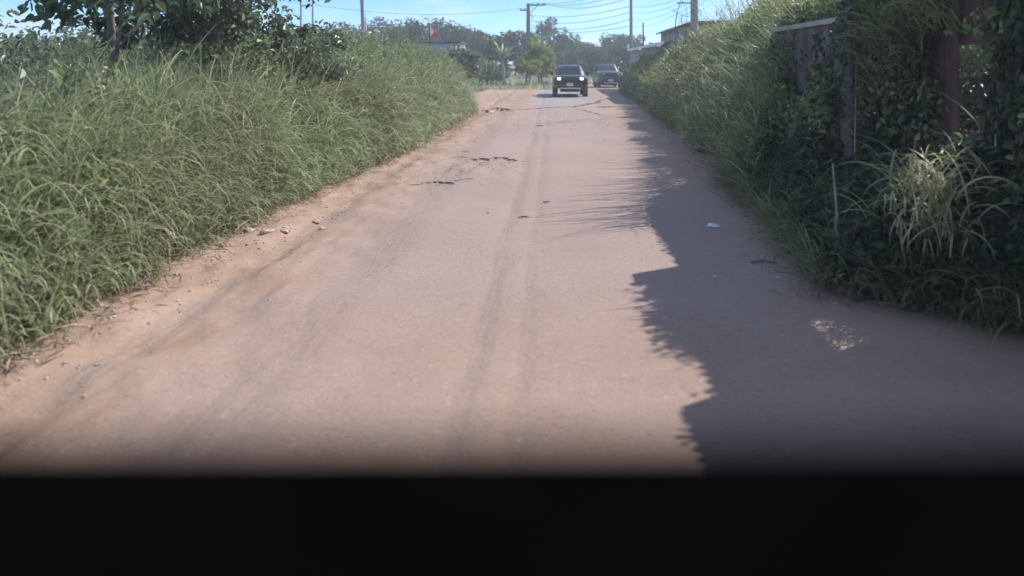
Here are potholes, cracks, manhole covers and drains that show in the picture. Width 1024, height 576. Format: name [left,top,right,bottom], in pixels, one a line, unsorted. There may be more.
pothole [462,157,521,165]
pothole [475,107,514,116]
